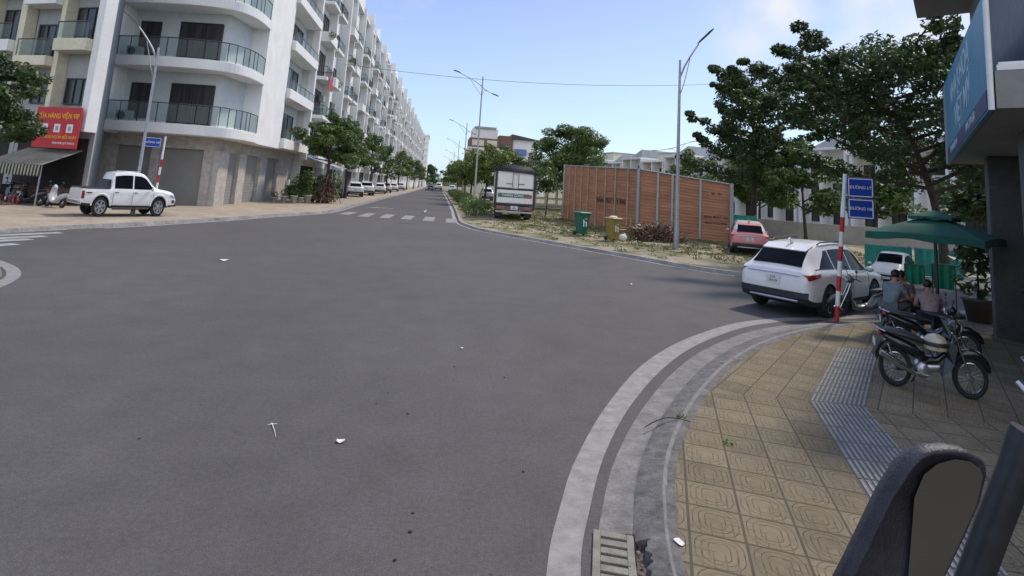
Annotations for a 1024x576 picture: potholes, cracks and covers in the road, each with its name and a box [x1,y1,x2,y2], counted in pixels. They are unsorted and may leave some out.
drain grate [592,529,637,576]
